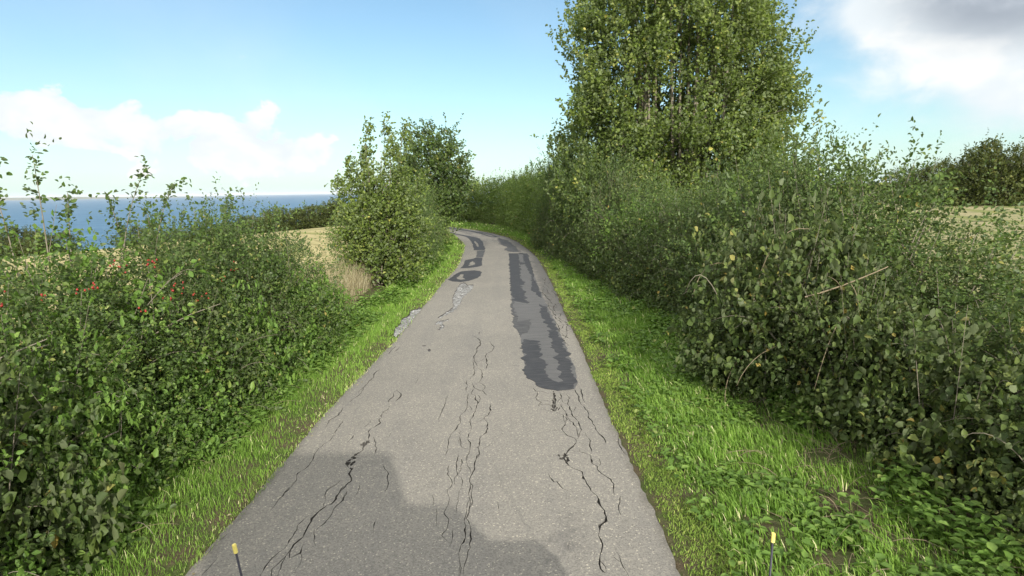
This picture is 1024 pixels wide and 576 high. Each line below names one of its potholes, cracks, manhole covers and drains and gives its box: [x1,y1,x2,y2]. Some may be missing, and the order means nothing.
crack [533,388,629,576]
pothole [393,307,422,338]
crack [432,332,494,574]
crack [261,369,419,576]
pothole [438,282,473,318]
